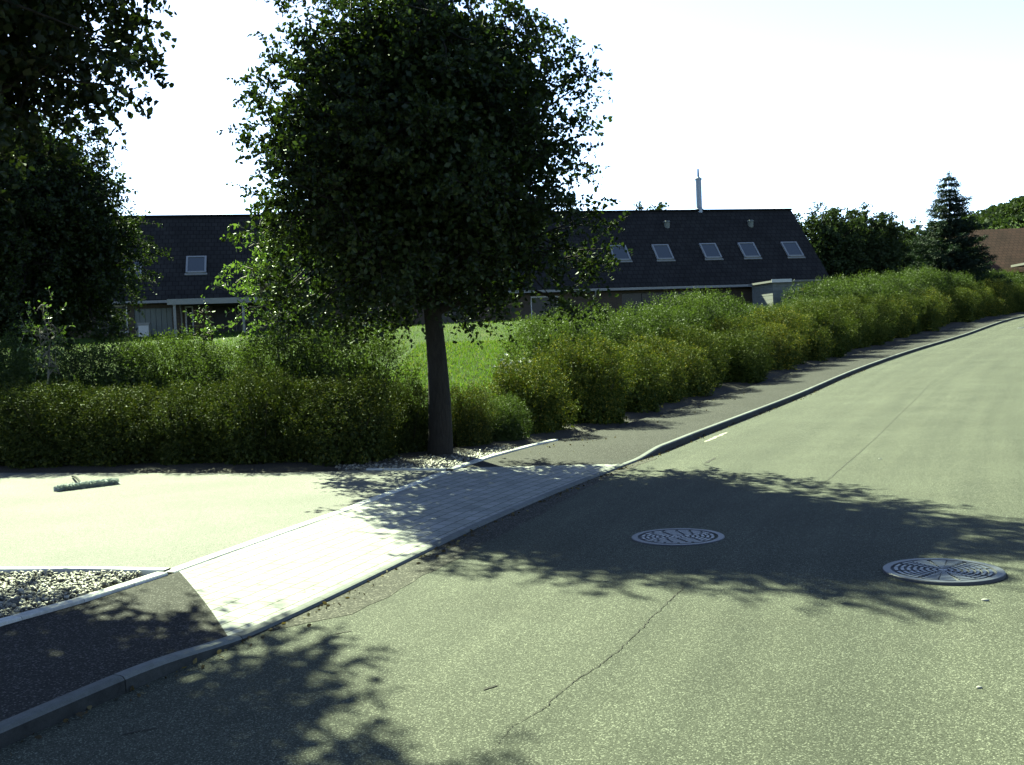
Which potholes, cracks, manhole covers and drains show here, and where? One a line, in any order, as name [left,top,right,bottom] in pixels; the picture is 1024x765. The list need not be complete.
manhole cover [631,528,725,546]
crack [486,577,695,753]
manhole cover [882,558,1006,586]
